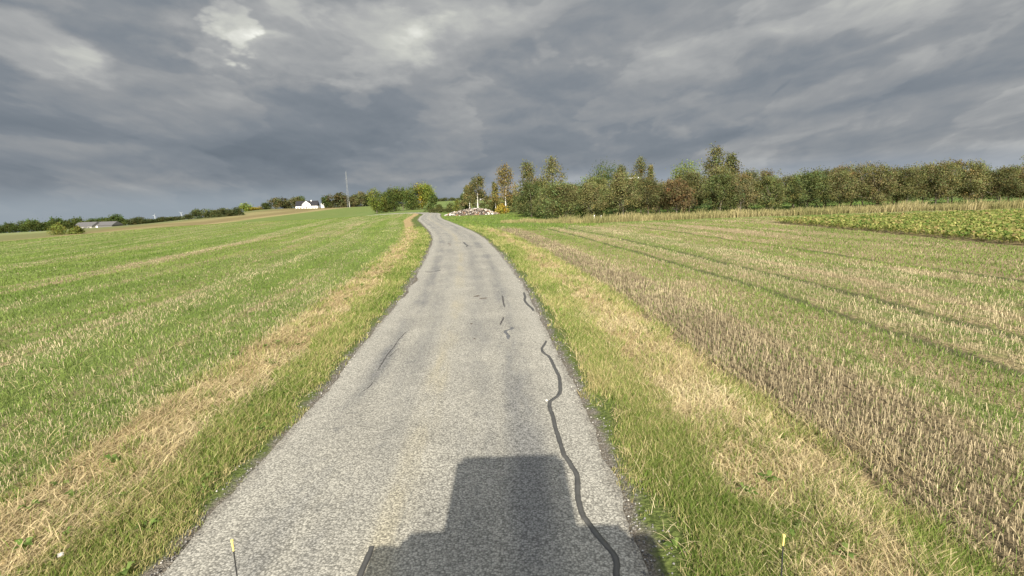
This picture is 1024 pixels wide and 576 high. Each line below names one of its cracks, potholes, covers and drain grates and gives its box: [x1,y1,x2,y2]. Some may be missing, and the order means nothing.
crack [500,296,514,339]
crack [362,332,406,392]
